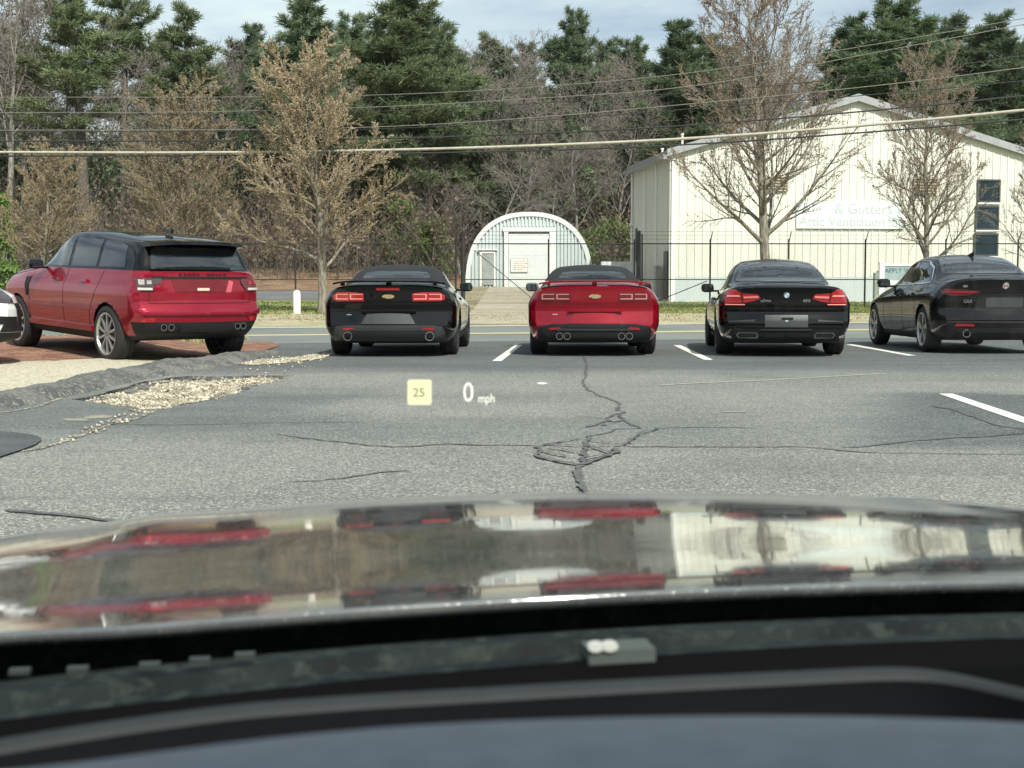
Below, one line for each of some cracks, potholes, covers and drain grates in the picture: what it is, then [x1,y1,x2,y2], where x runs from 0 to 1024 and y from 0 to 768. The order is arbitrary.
crack [276,433,536,447]
crack [626,402,1024,454]
crack [290,470,406,482]
